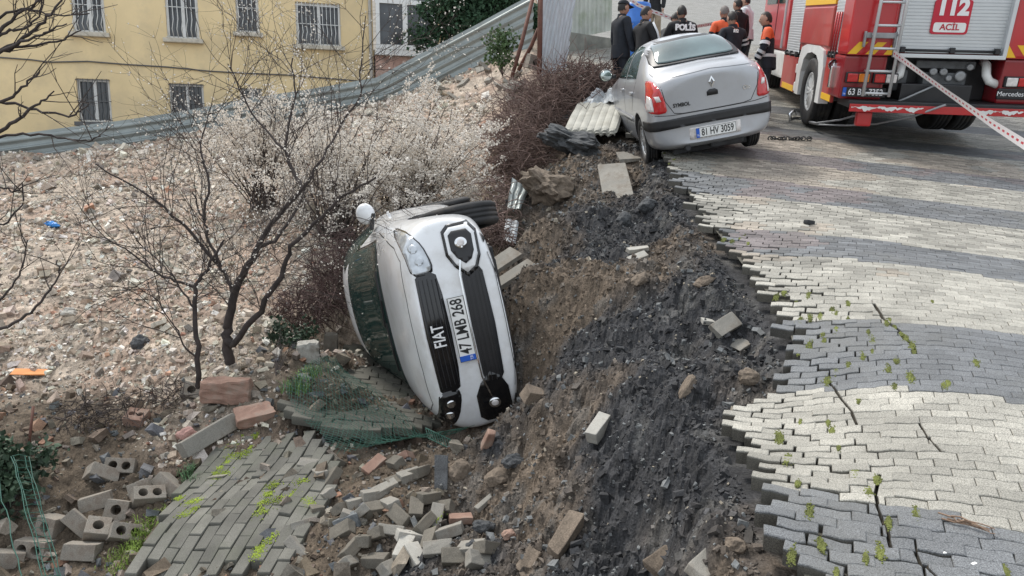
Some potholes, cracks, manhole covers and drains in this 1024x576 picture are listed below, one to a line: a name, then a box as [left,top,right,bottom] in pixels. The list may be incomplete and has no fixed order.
crack [874,475,892,548]
crack [915,547,935,576]
